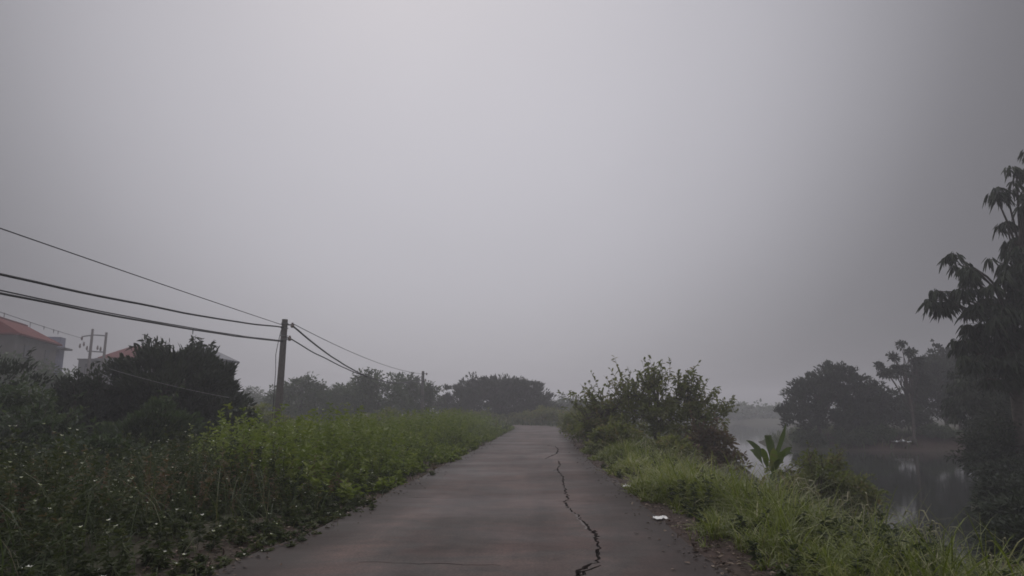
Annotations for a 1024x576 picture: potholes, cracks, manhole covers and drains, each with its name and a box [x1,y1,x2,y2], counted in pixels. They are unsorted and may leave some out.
crack [547,447,601,576]
